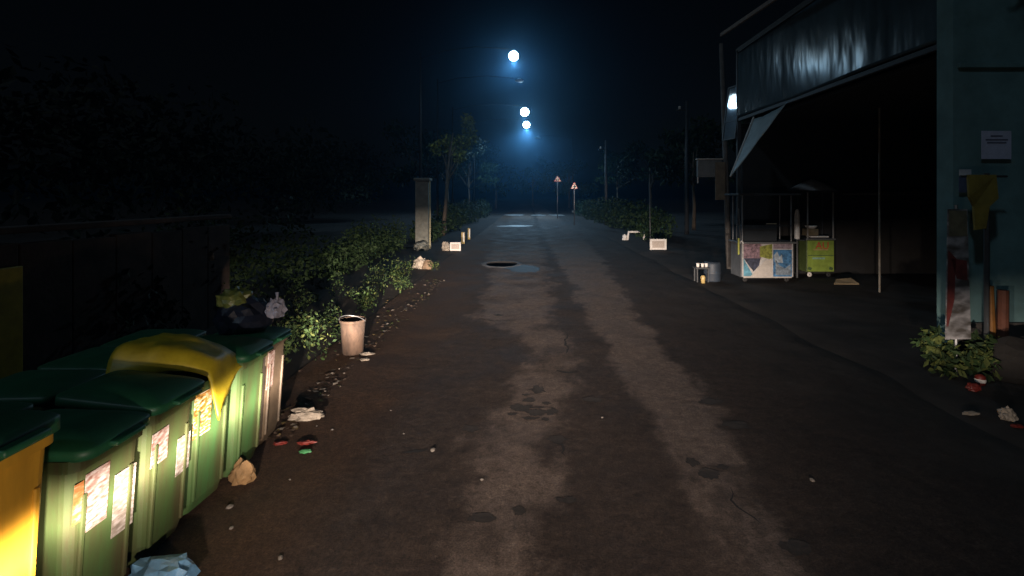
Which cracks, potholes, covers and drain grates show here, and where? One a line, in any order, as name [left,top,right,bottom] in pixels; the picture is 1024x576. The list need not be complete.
pothole [467,512,497,523]
crack [730,487,762,524]
manhole cover [481,260,522,268]
pothole [698,468,720,480]
pothole [509,403,533,412]
